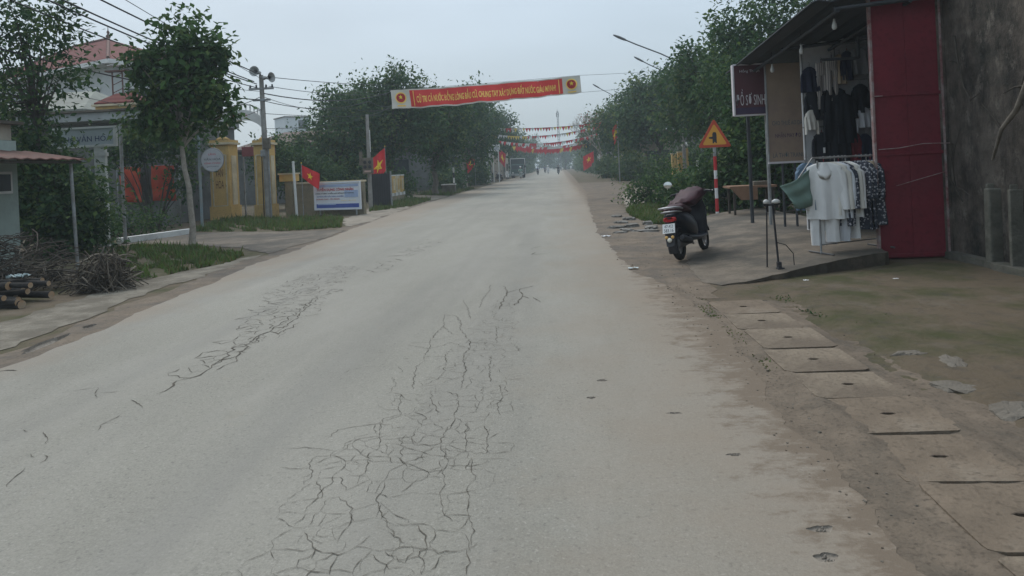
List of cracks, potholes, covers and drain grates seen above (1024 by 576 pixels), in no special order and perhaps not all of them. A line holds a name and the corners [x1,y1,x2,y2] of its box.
pothole [813,552,838,562]
crack [6,388,142,487]
crack [160,266,355,393]
crack [221,285,519,576]
